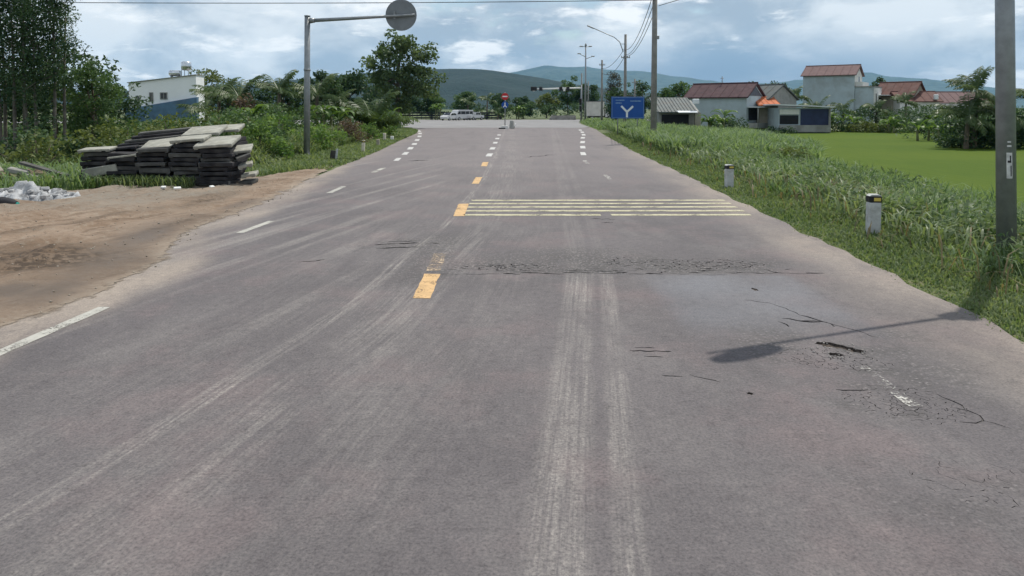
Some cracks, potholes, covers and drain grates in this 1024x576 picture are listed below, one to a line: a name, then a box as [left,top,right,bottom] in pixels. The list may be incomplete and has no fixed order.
crack [377,241,440,249]
pothole [794,342,874,360]
crack [909,461,1019,508]
crack [630,347,672,357]
crack [836,385,1011,429]
crack [451,257,818,275]
crack [751,300,874,337]
